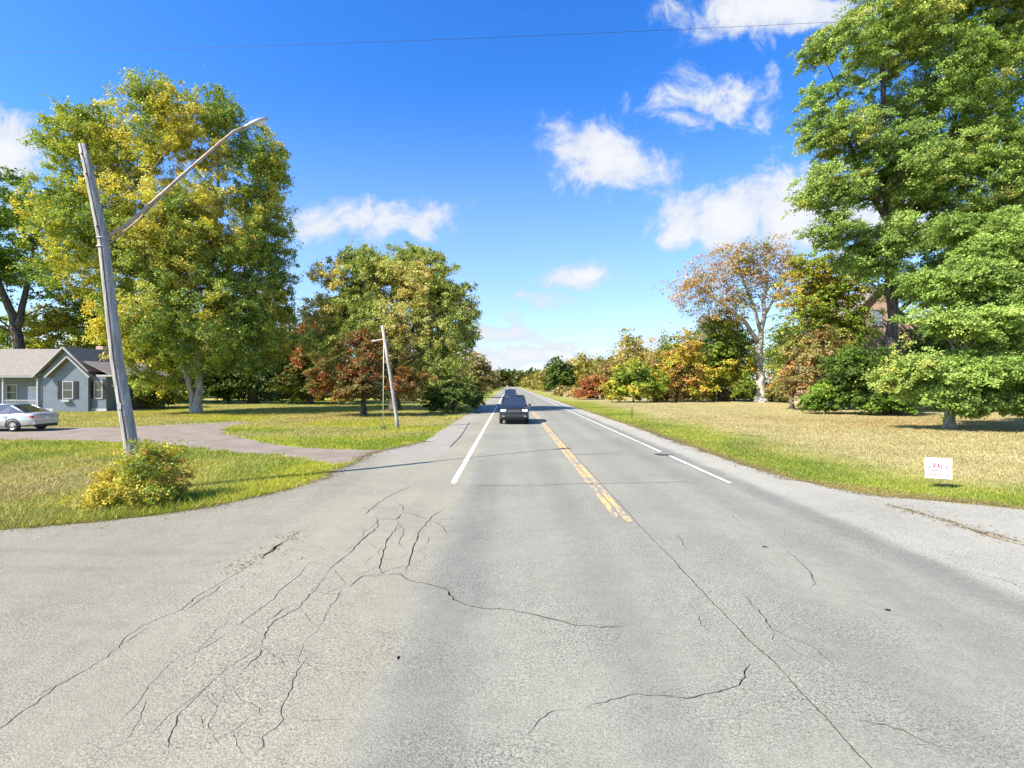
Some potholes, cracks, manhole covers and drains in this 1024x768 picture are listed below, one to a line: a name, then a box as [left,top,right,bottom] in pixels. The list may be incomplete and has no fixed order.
crack [525,663,750,737]
crack [89,487,621,768]
crack [847,717,951,755]
crack [741,591,834,665]
